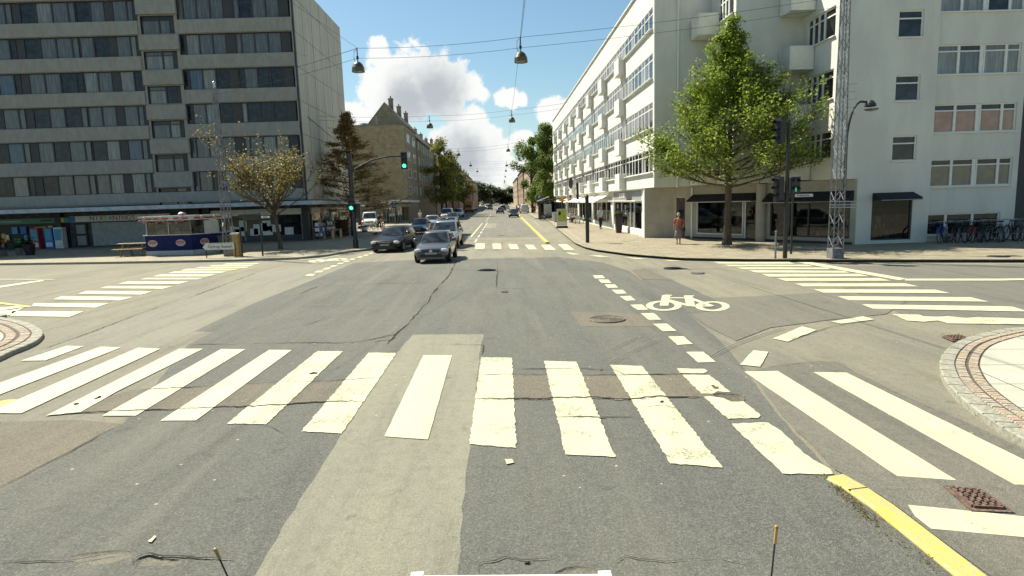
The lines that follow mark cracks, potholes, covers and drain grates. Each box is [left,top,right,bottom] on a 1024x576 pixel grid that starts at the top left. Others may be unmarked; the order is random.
drain grate [942,485,1014,512]
crack [478,556,555,573]
crack [132,552,233,563]
crack [2,553,113,562]
crack [186,333,395,345]
crack [616,555,761,567]
manhole cover [588,315,626,323]
